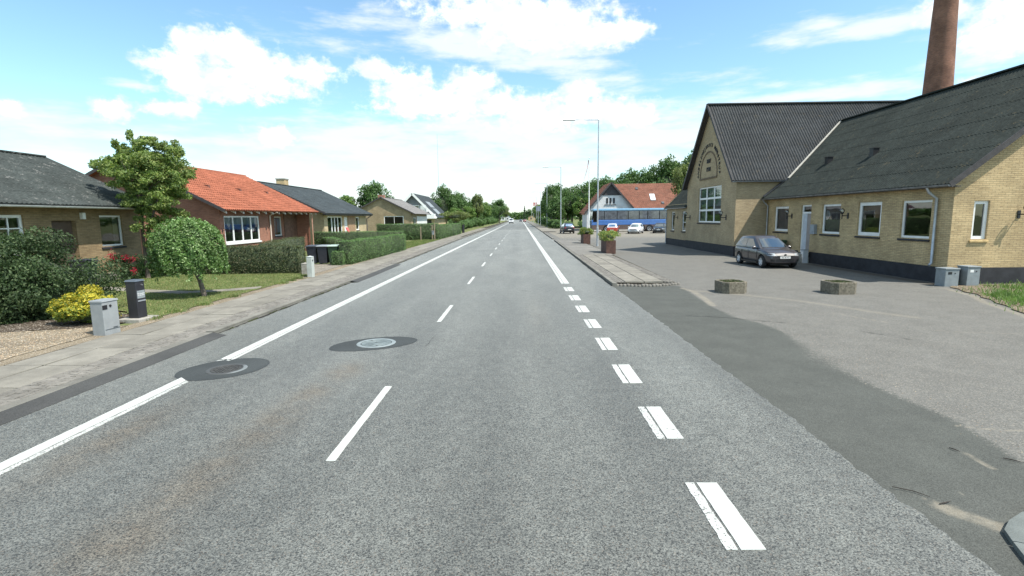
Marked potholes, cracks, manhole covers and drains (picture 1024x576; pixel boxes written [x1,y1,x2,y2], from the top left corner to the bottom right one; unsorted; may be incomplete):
manhole cover [205,364,248,375]
manhole cover [356,338,396,348]
